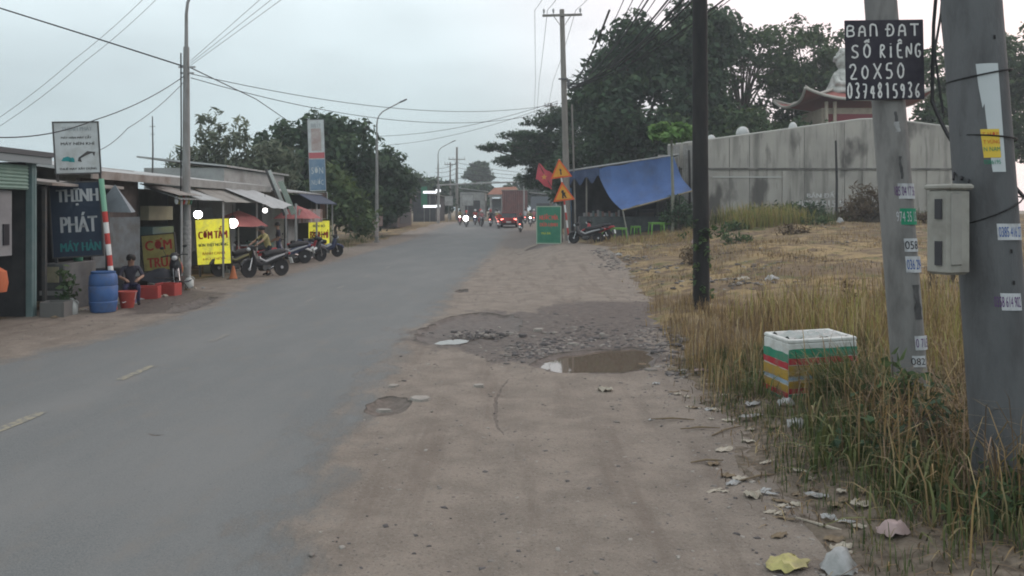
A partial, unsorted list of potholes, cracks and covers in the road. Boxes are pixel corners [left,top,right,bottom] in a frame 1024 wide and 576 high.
pothole [364,396,412,417]
crack [493,379,509,435]
pothole [412,312,526,345]
pothole [528,346,660,374]
